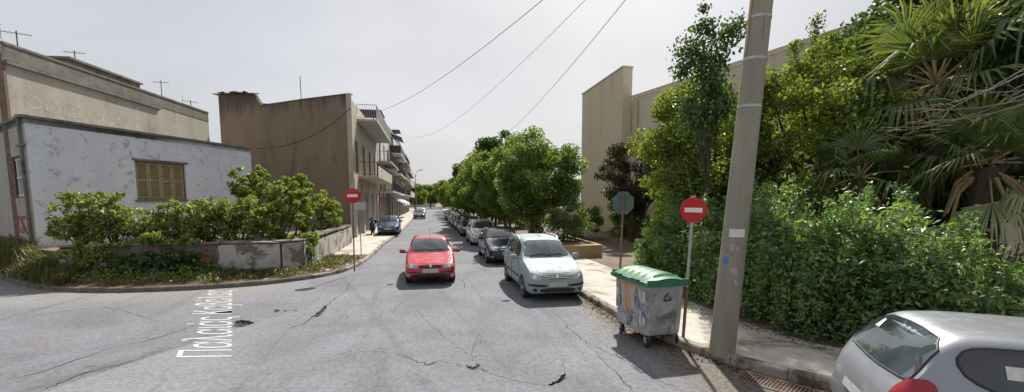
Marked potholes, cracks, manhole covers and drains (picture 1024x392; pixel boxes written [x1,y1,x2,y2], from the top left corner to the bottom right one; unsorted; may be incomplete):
crack [558,316,683,391]
crack [361,301,549,386]
drain grate [733,370,824,392]
